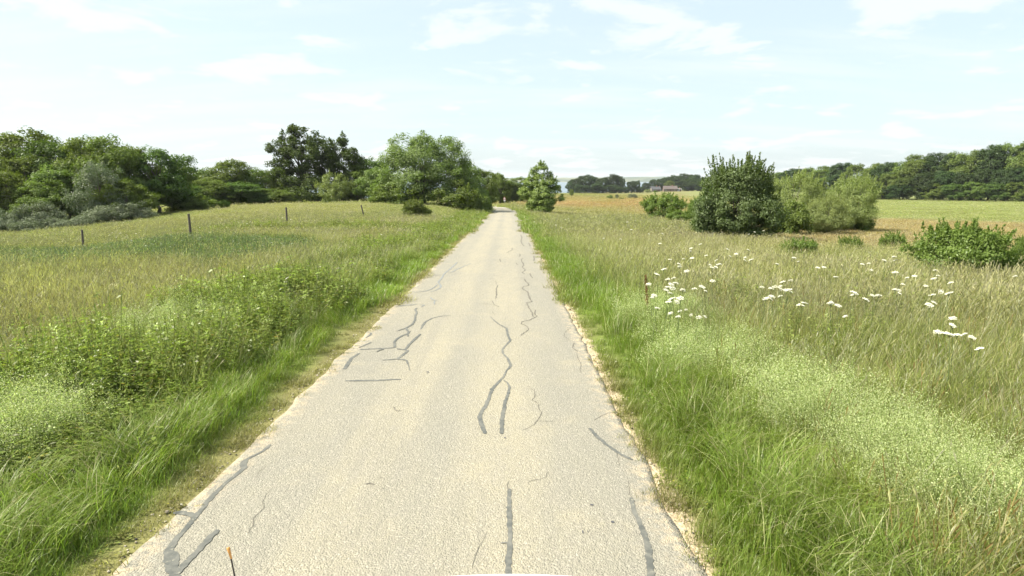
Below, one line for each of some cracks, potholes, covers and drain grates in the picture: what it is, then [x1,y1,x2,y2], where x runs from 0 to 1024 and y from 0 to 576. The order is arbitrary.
crack [499,235,537,336]
